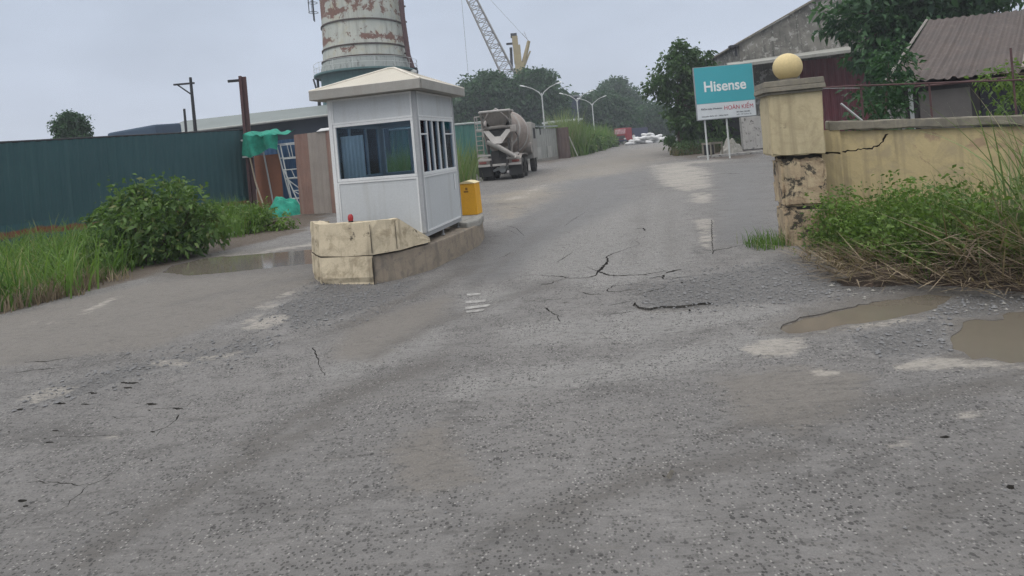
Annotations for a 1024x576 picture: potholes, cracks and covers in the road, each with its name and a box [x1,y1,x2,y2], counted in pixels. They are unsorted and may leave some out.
crack [26,468,117,521]
crack [525,228,697,314]
crack [114,399,205,436]
pothole [780,297,907,330]
